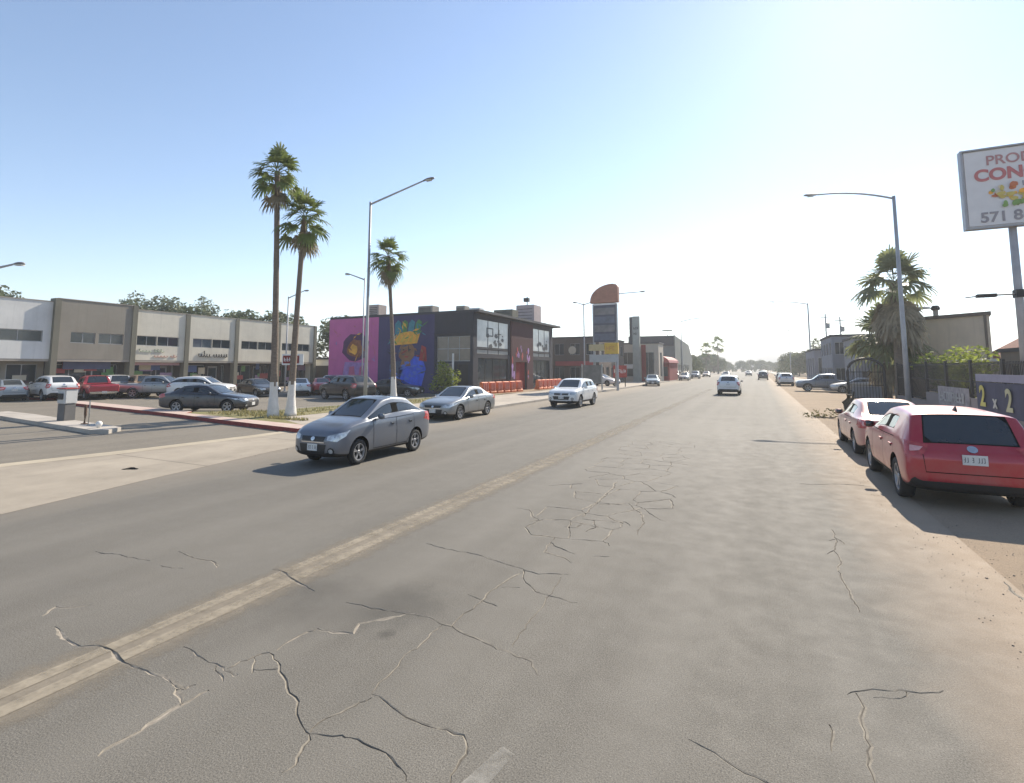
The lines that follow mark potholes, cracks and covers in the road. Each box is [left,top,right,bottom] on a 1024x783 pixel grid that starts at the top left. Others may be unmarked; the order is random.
crack [689,739,769,783]
crack [43,441,700,783]
crack [827,530,860,612]
crack [829,688,943,783]
